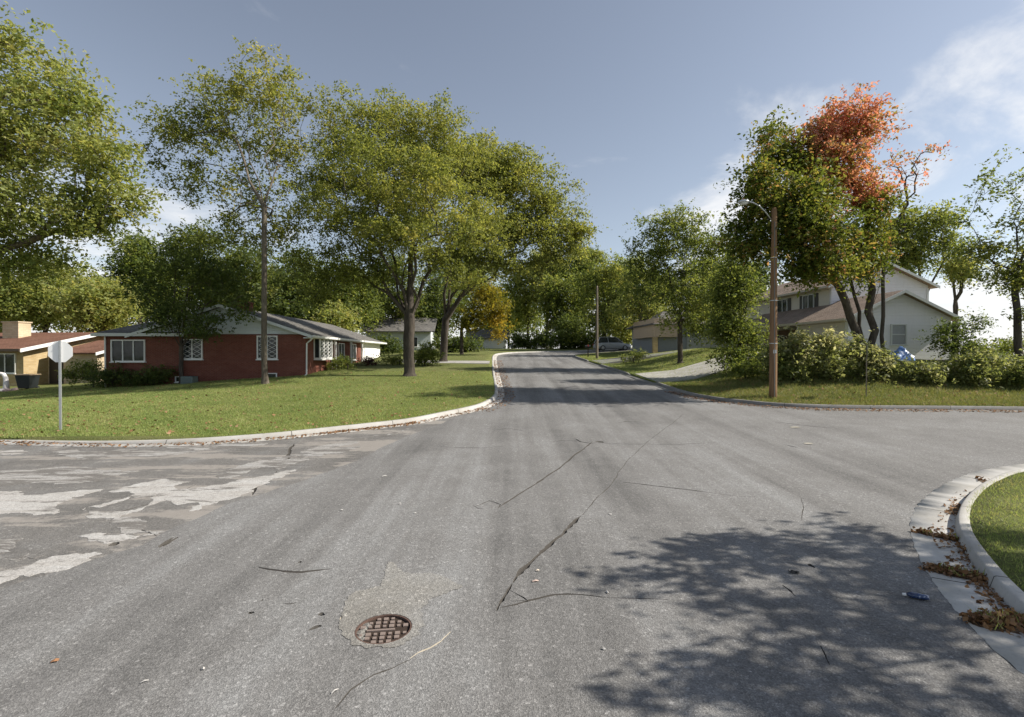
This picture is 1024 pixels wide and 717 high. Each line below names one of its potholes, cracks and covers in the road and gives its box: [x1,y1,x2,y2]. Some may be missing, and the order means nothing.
crack [475,500,668,611]
crack [252,444,294,495]
crack [335,631,451,708]
manhole cover [355,614,412,644]
